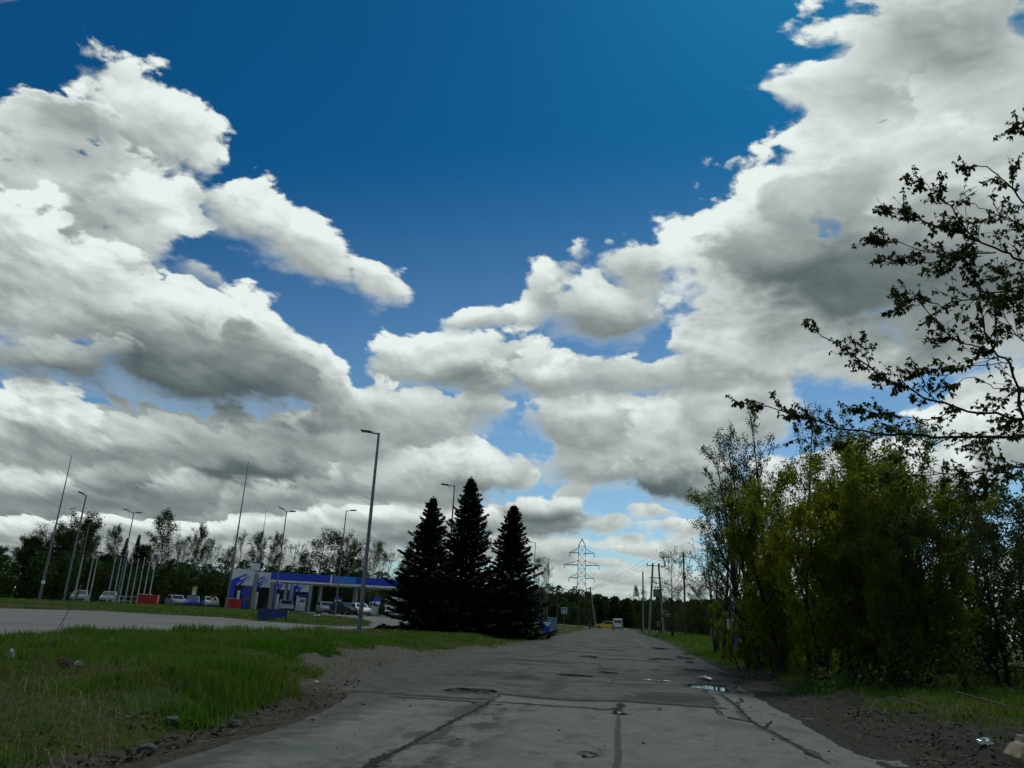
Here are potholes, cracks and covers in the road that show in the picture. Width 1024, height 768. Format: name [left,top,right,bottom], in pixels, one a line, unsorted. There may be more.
pothole [675,682,750,695]
pothole [438,687,500,695]
